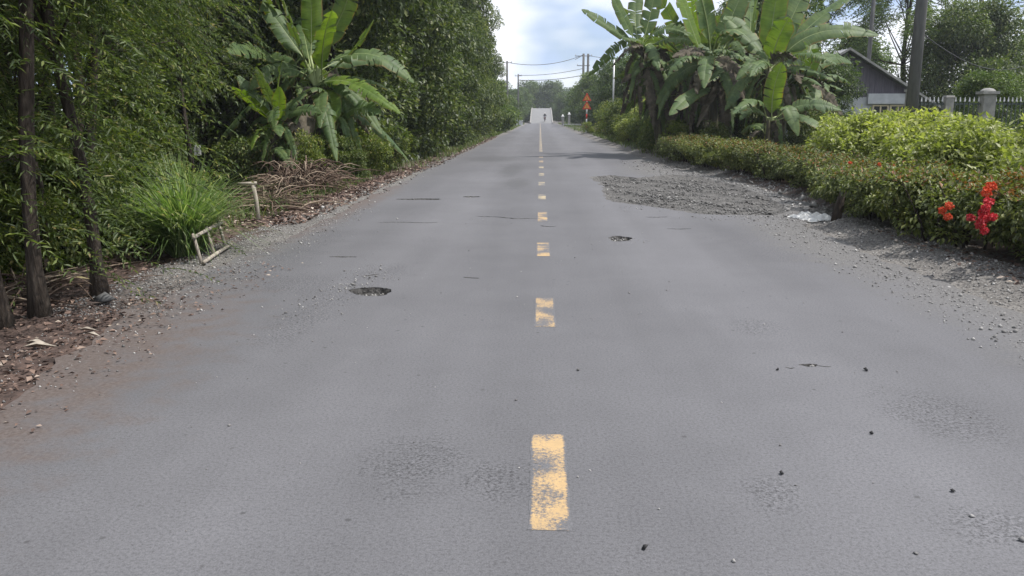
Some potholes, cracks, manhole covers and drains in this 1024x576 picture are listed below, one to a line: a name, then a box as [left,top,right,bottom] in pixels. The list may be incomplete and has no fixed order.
pothole [349,287,392,296]
pothole [590,175,786,215]
